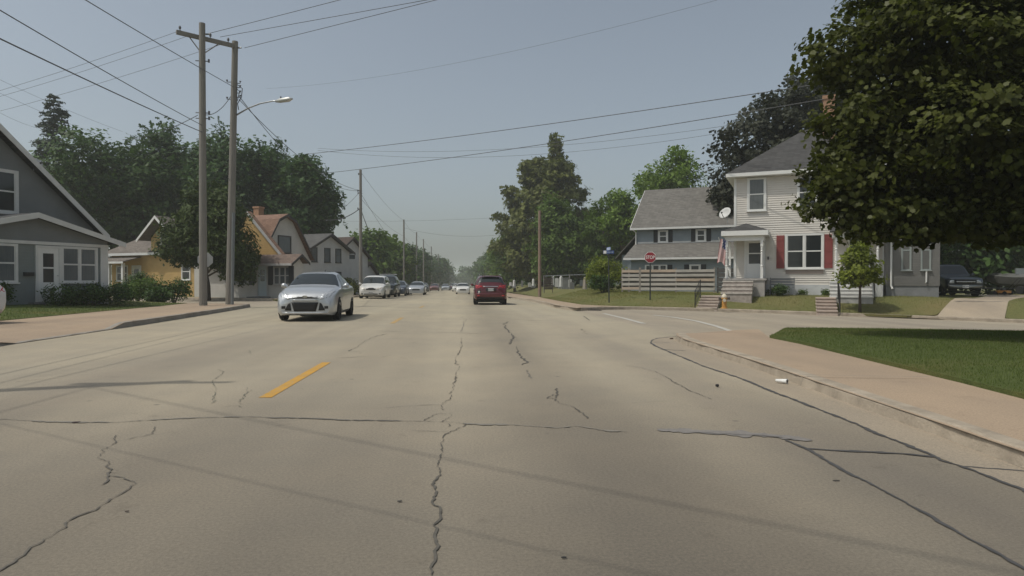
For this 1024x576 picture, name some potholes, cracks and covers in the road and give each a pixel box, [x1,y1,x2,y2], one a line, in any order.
crack [502,322,532,378]
crack [388,342,466,575]
crack [0,427,156,570]
